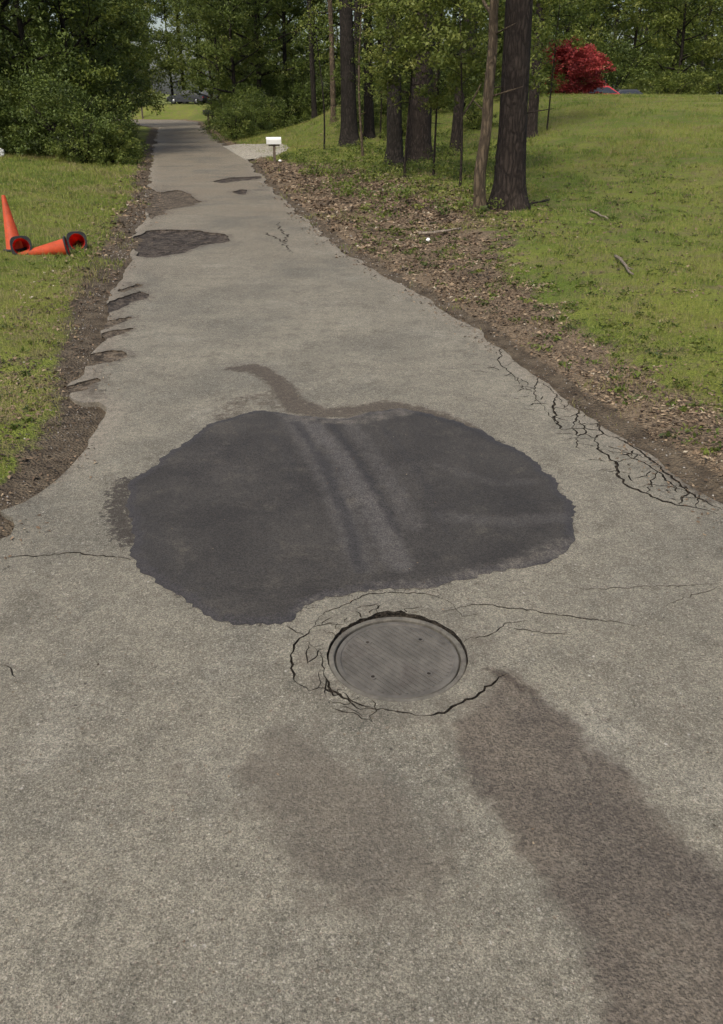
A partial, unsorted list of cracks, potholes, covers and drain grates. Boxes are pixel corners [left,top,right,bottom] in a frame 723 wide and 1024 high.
pothole [101,328,134,341]
crack [287,592,640,721]
crack [266,222,293,253]
pothole [67,378,101,393]
pothole [90,350,127,366]
pothole [144,186,202,219]
crack [567,583,720,608]
manhole cover [329,617,467,716]
pothole [107,291,149,313]
crack [472,349,722,514]
pothole [103,317,132,330]
crack [3,552,131,560]
